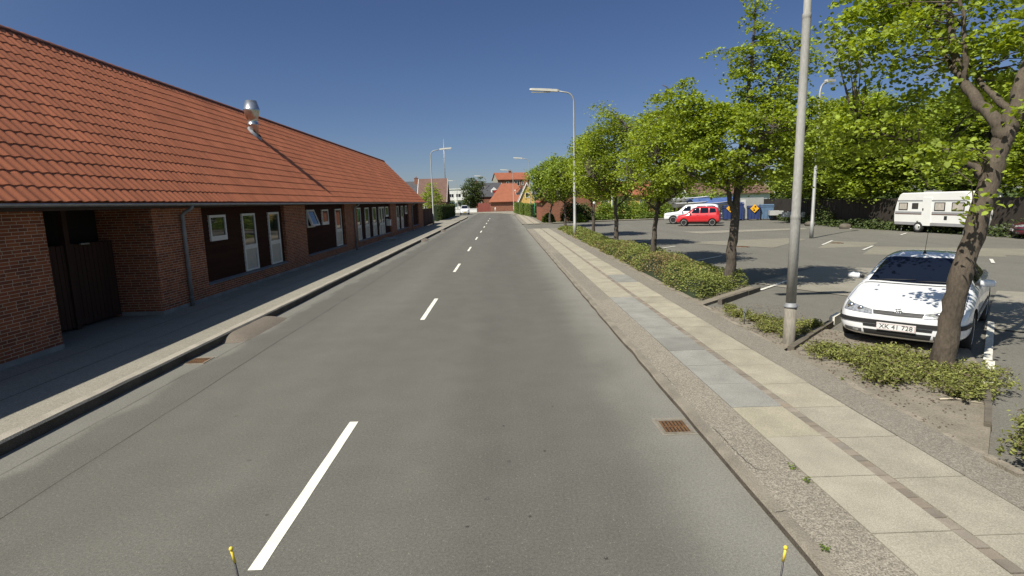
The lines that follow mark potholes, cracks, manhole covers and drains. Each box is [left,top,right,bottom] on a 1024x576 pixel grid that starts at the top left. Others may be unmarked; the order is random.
drain grate [180,356,218,365]
drain grate [651,417,699,436]
